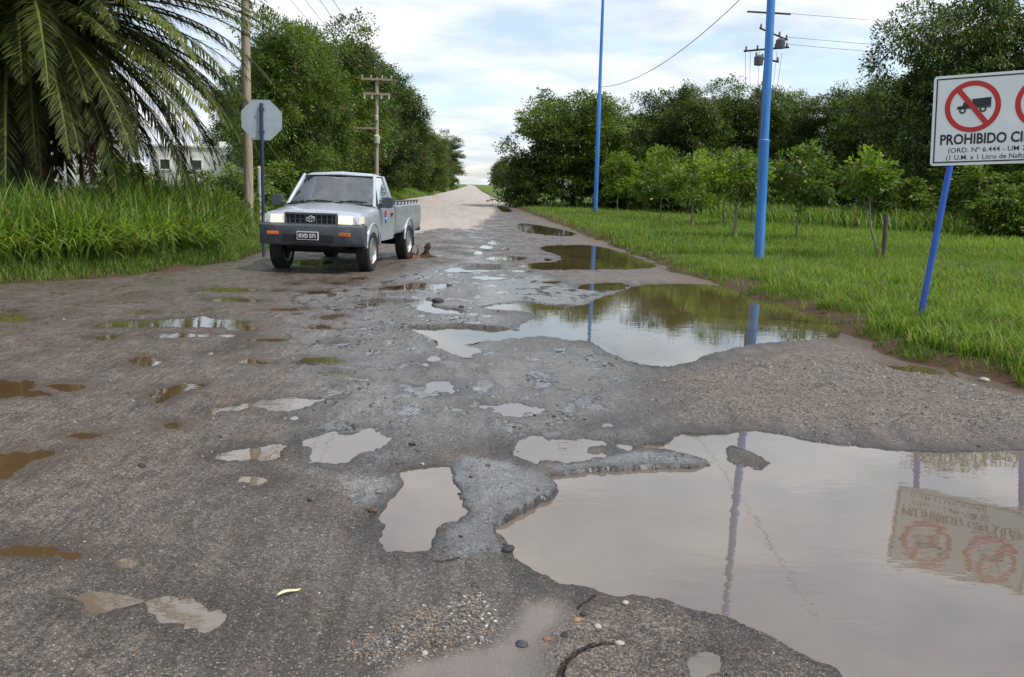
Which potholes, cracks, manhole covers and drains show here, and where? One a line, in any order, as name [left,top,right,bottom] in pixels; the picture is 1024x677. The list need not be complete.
pothole [513,244,663,271]
pothole [488,426,1024,677]
pothole [192,395,333,419]
pothole [568,280,635,292]
crack [544,637,625,677]
pothole [0,442,85,482]
pothole [417,354,451,363]
pothole [0,376,65,402]
pothole [366,462,477,555]
pothole [50,582,241,640]
pothole [402,323,540,358]
pothole [480,283,841,368]
